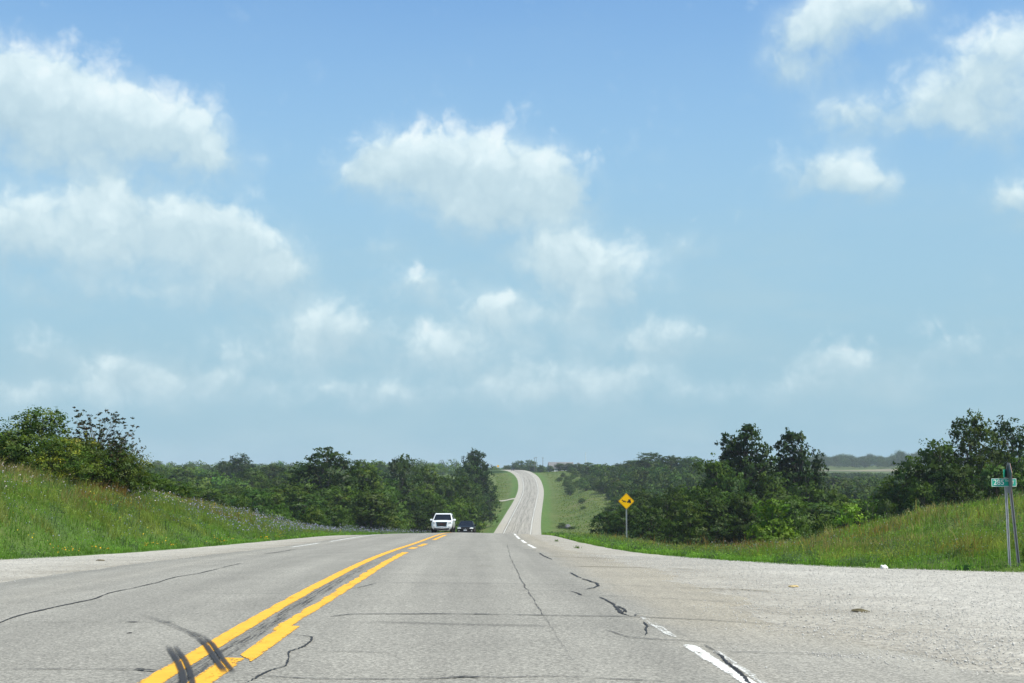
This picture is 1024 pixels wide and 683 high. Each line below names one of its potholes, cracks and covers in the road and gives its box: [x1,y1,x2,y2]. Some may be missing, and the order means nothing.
crack [0,549,293,623]
crack [245,633,678,683]
crack [327,549,838,683]
